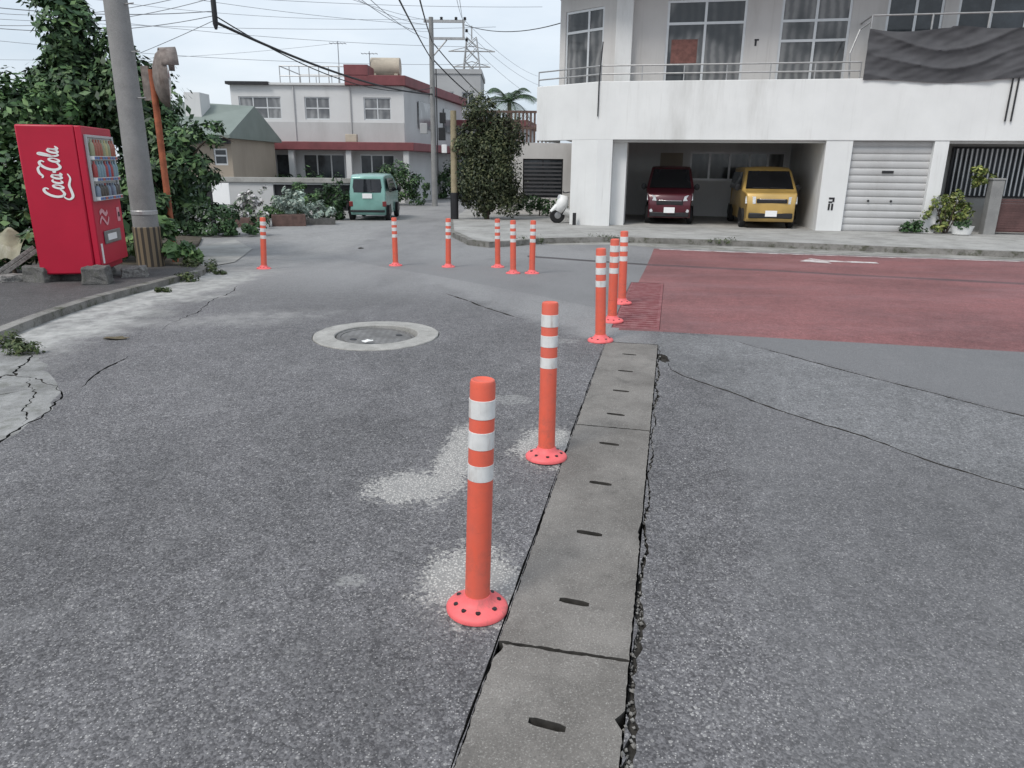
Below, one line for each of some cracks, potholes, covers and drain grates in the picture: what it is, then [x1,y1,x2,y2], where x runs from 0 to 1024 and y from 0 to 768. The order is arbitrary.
crack [82,356,128,387]
crack [0,353,63,443]
manhole cover [312,321,439,351]
crack [619,349,1024,768]
